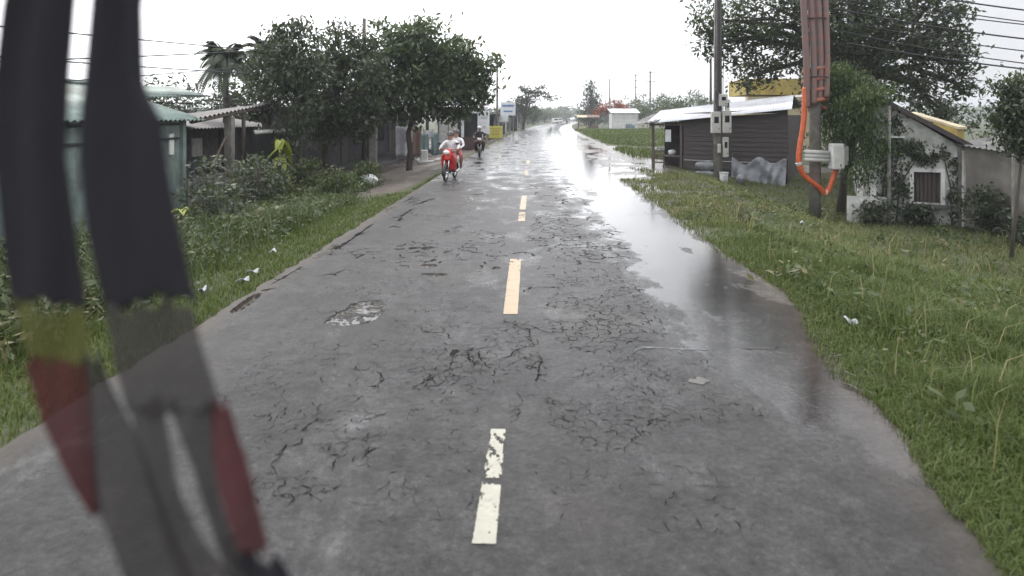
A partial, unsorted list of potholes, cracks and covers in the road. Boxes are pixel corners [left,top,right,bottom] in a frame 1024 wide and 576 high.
pothole [324,300,385,326]
crack [218,185,779,523]
crack [527,457,753,536]
pothole [230,293,262,313]
